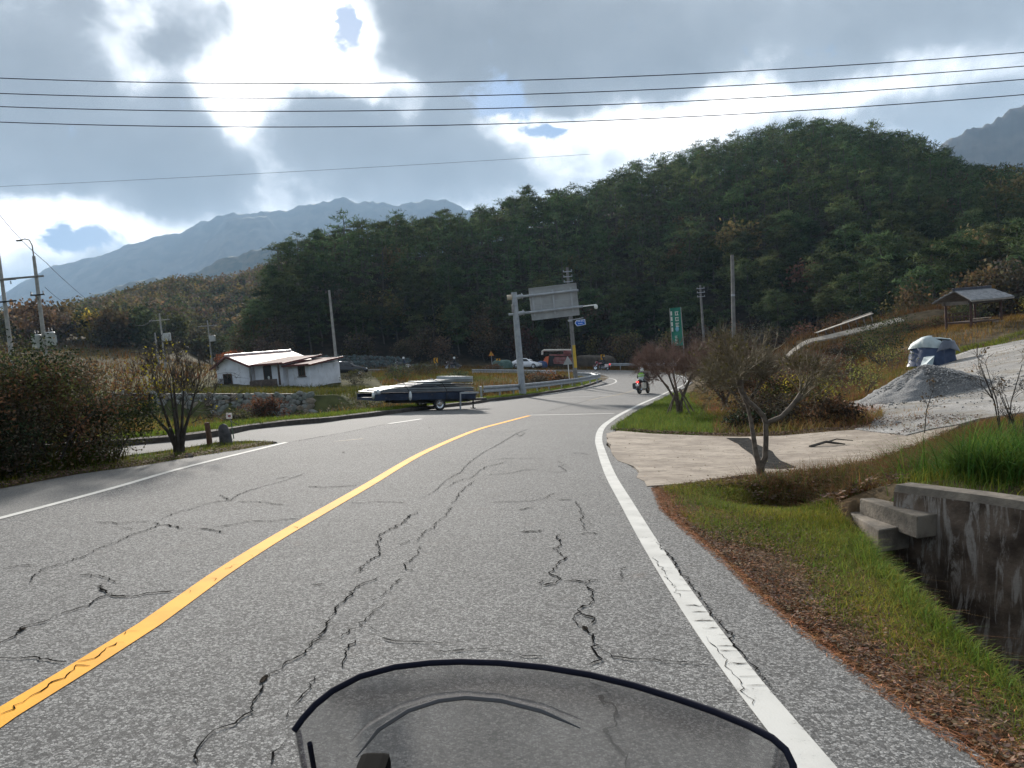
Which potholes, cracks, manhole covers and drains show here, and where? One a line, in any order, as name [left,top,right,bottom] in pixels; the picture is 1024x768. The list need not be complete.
crack [500,493,754,704]
crack [0,432,546,765]
